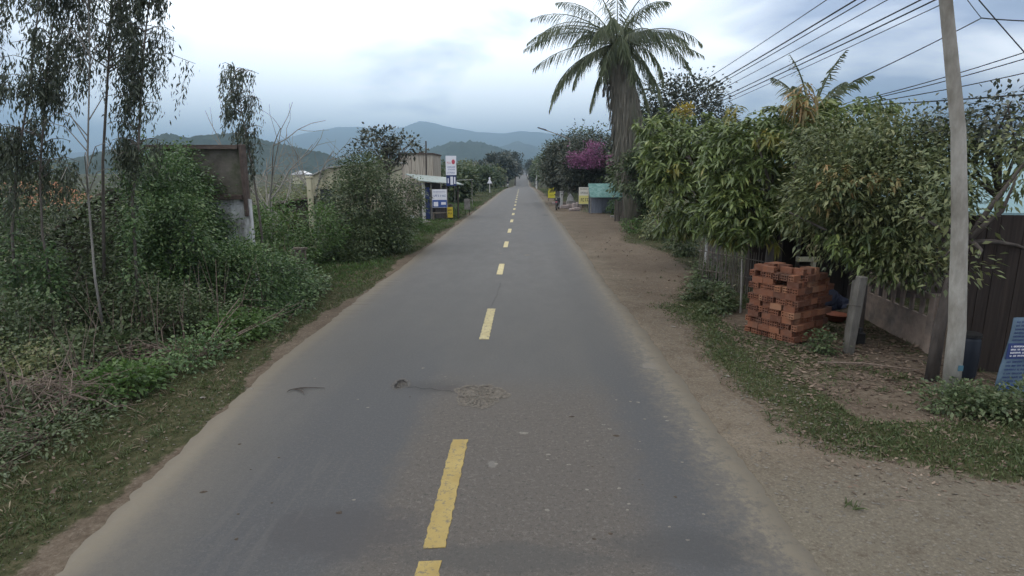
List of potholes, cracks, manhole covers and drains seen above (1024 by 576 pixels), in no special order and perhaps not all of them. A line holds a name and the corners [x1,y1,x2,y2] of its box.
pothole [390,378,412,390]
